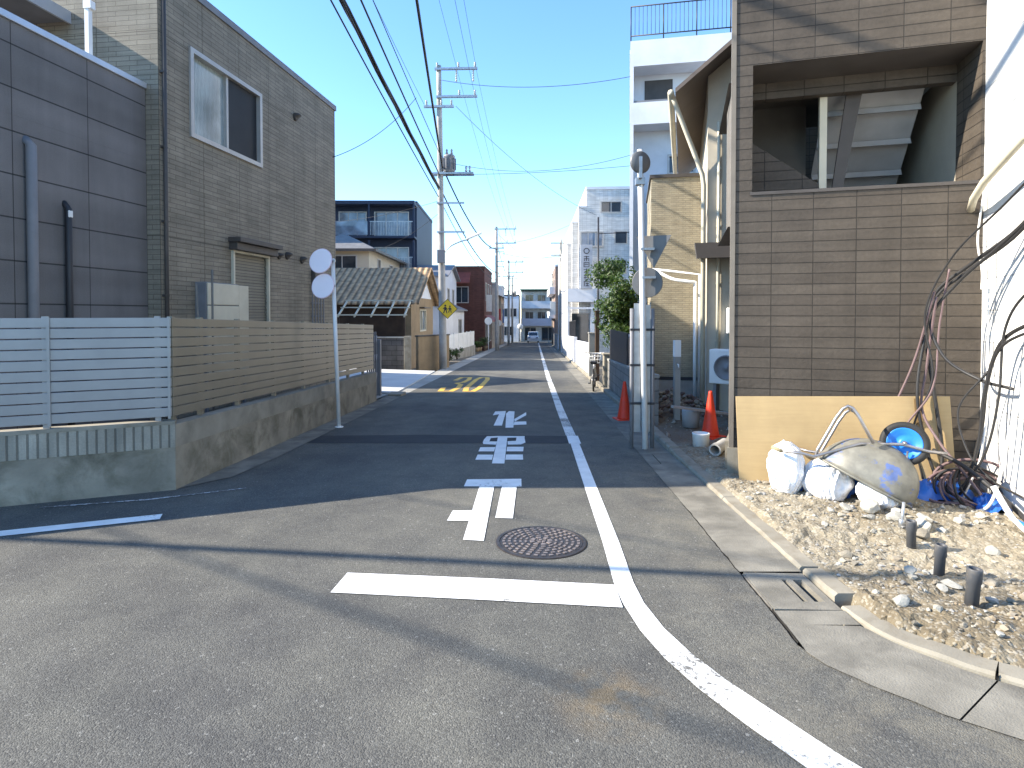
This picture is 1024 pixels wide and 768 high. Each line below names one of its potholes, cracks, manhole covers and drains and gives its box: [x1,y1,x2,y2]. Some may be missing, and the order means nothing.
manhole cover [496,526,587,560]
